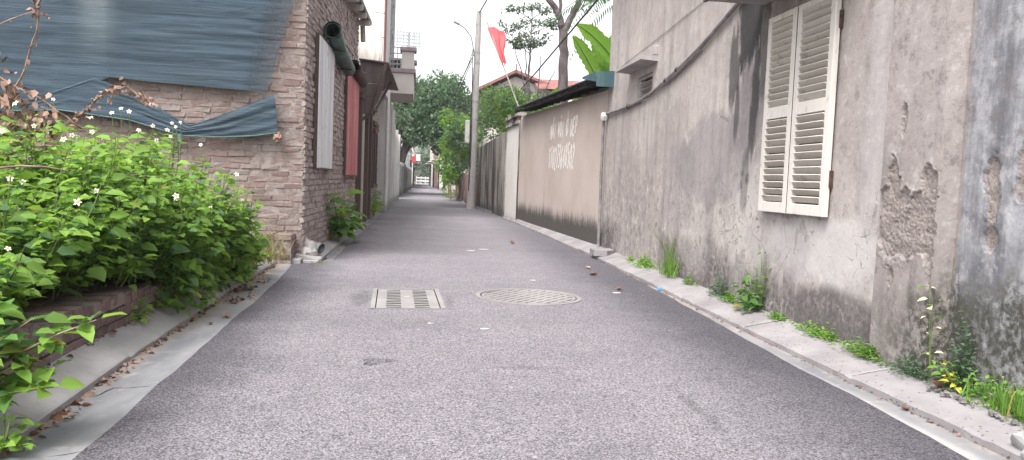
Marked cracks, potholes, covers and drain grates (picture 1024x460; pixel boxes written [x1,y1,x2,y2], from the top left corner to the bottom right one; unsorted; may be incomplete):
drain grate [370,288,446,309]
manhole cover [475,288,582,305]
